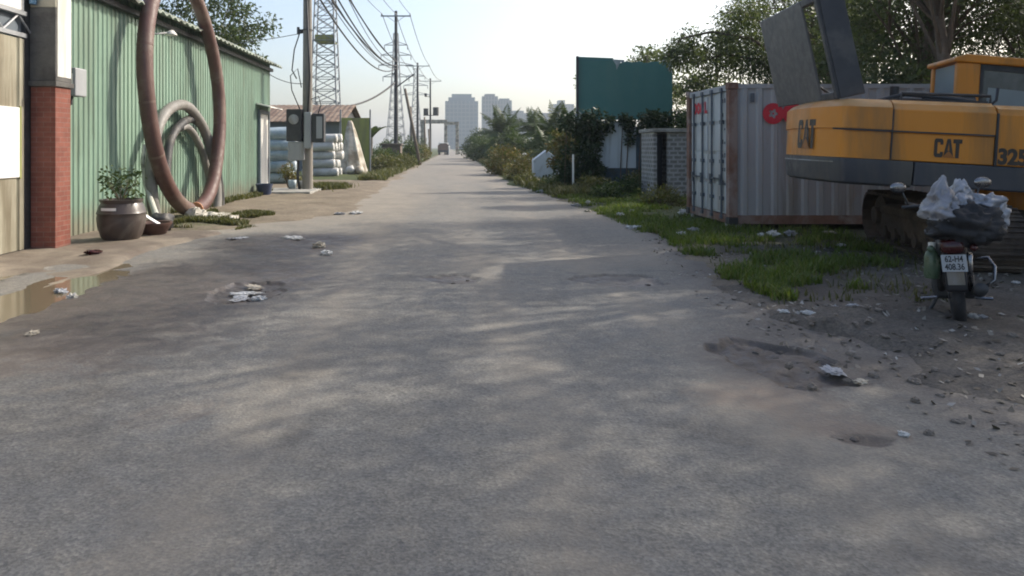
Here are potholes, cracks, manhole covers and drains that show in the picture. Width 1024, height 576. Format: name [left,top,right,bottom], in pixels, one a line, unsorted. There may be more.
pothole [204,281,288,305]
pothole [415,273,485,284]
pothole [827,433,898,448]
pothole [566,273,674,287]
pothole [702,336,862,392]
